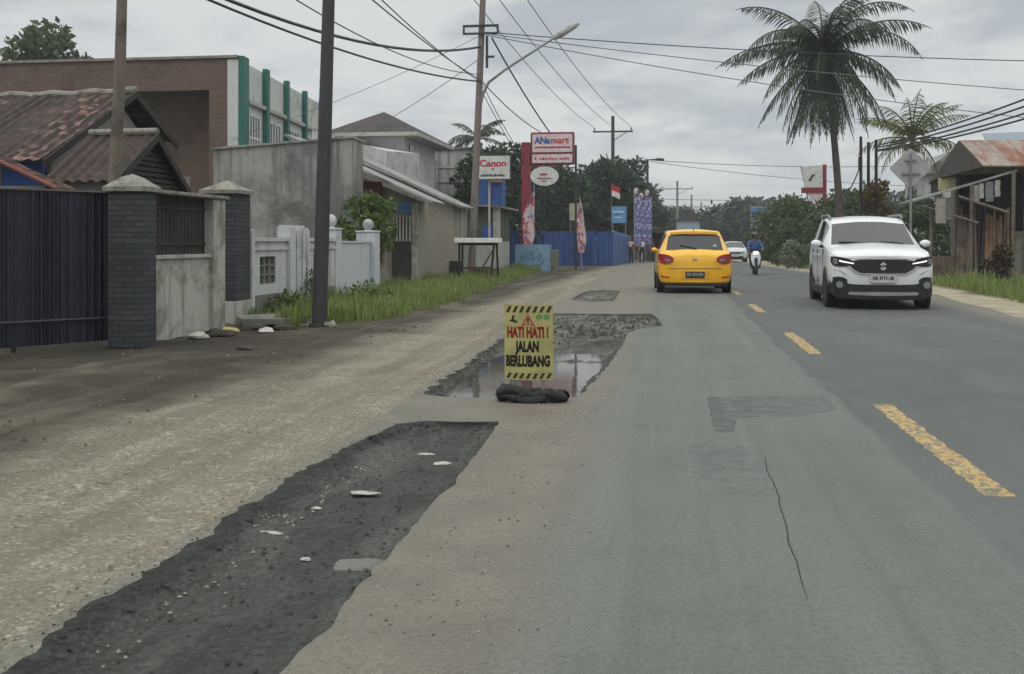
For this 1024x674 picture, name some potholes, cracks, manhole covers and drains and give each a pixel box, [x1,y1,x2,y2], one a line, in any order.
crack [765,459,808,599]
pothole [423,313,661,396]
pothole [1,421,499,674]
